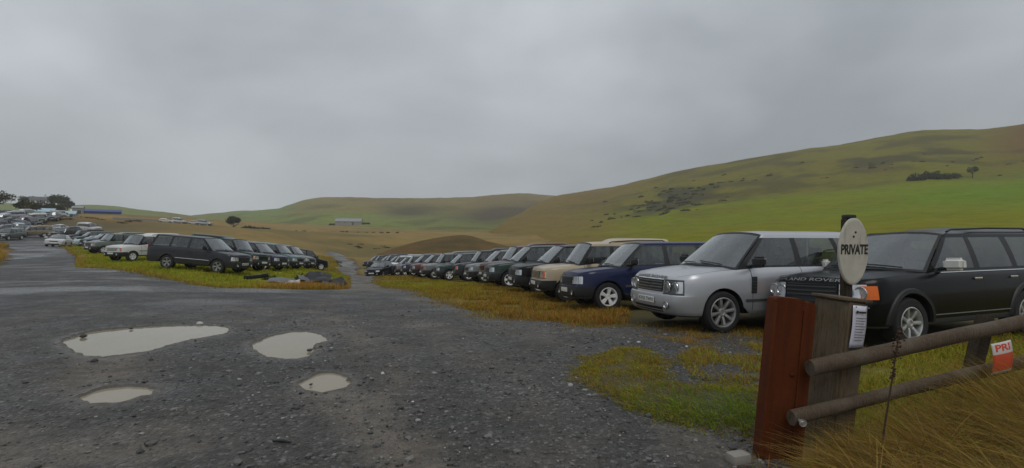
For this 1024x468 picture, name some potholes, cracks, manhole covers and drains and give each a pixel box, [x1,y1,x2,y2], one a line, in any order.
pothole [70,383,166,407]
pothole [55,324,233,358]
pothole [292,370,357,394]
pothole [247,331,332,361]
